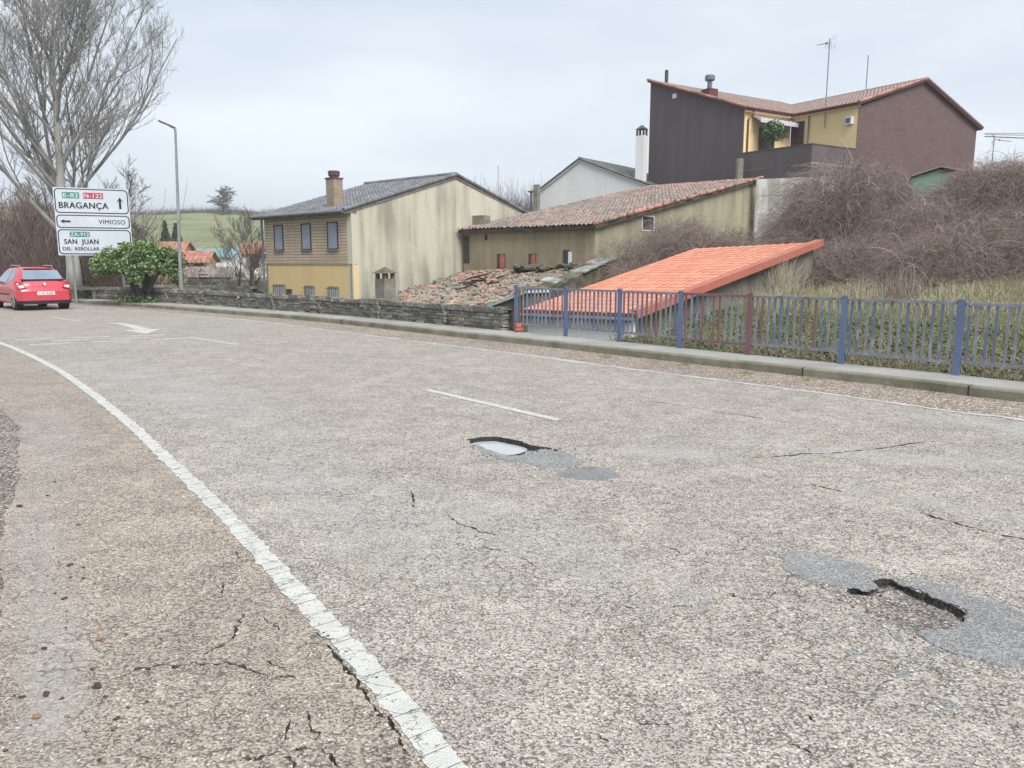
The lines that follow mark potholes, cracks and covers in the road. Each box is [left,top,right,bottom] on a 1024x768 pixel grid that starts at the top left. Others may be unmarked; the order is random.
crack [448,516,500,550]
pothole [846,578,966,633]
crack [917,510,1024,540]
crack [114,606,318,680]
crack [756,441,933,458]
pothole [467,437,586,469]
crack [236,711,340,768]
